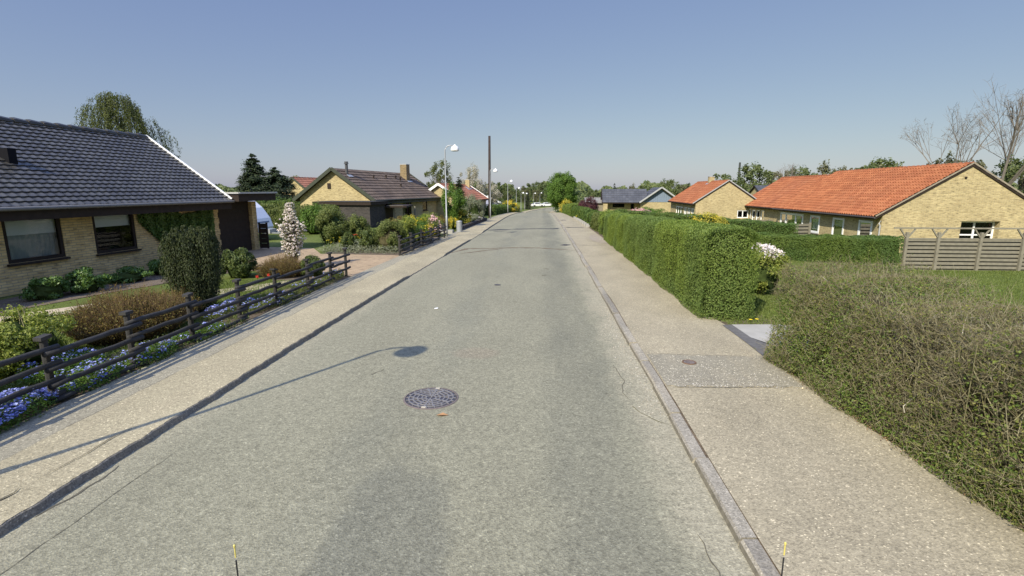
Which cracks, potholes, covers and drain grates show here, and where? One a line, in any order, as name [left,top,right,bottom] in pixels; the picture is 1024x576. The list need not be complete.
manhole cover [403,387,459,410]
